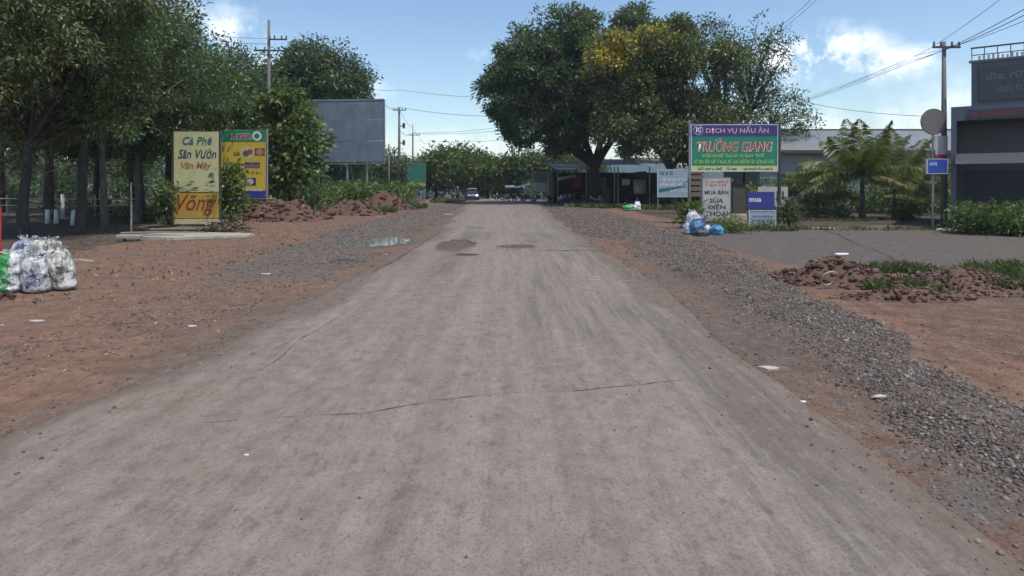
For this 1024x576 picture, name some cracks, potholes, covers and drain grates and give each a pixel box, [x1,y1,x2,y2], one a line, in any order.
crack [213,379,682,422]
pothole [431,238,480,253]
